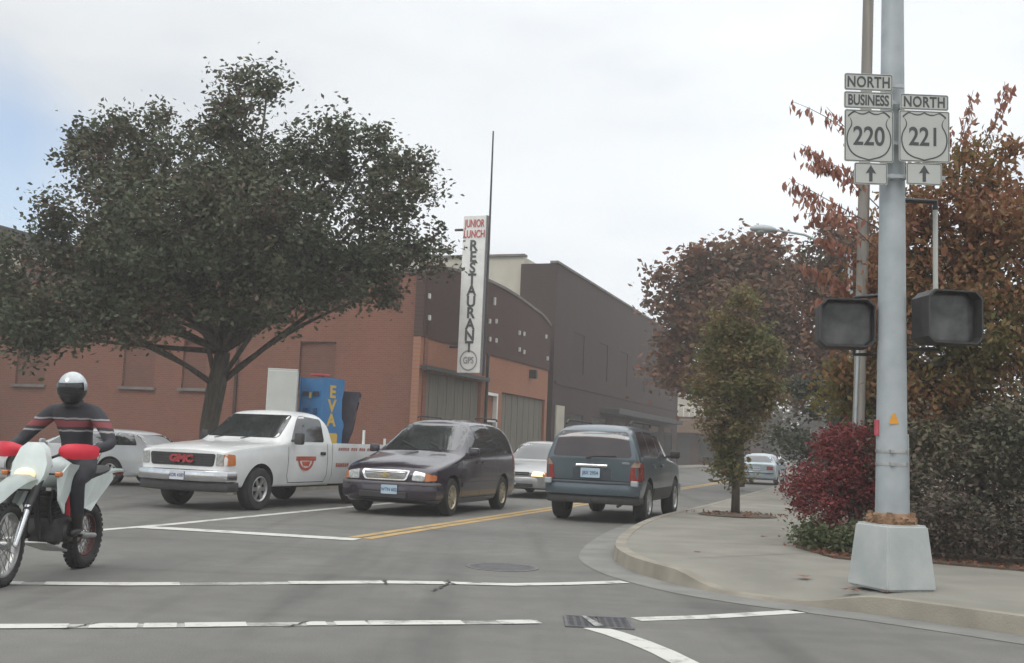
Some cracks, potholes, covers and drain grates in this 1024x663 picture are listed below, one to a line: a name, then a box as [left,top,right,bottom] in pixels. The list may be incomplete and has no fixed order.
manhole cover [466,562,539,572]
